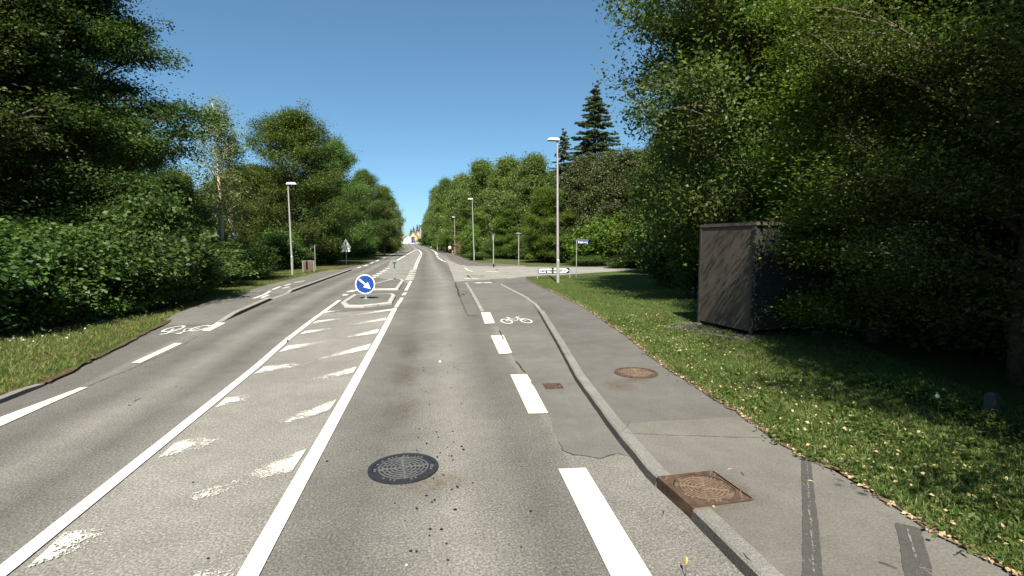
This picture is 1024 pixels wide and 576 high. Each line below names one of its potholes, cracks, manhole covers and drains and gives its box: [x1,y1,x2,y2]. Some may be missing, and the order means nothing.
manhole cover [657,470,754,518]
manhole cover [367,453,439,485]
manhole cover [614,367,658,379]
